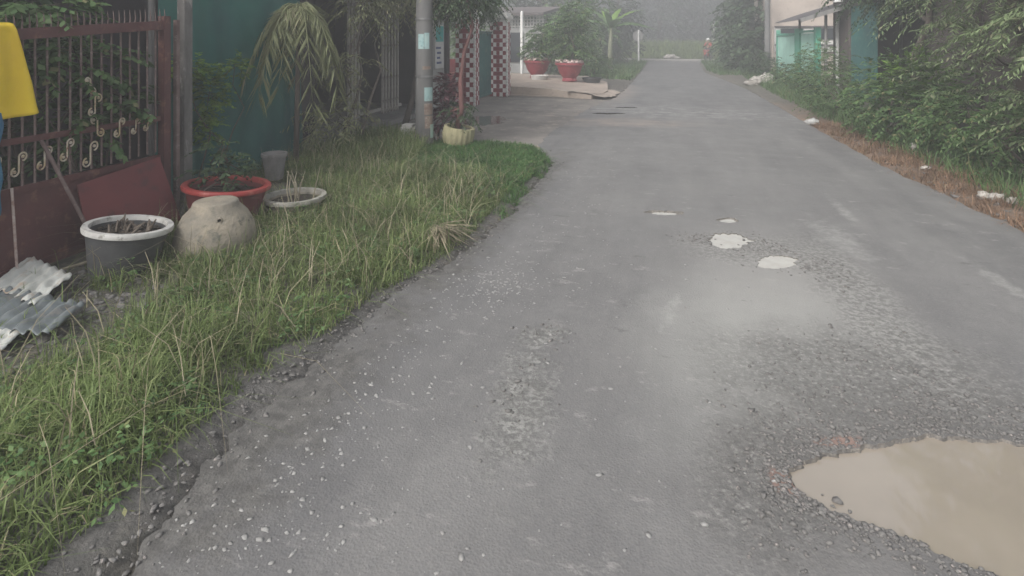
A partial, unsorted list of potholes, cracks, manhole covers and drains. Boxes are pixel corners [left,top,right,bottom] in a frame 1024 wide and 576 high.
pothole [787,433,1024,576]
